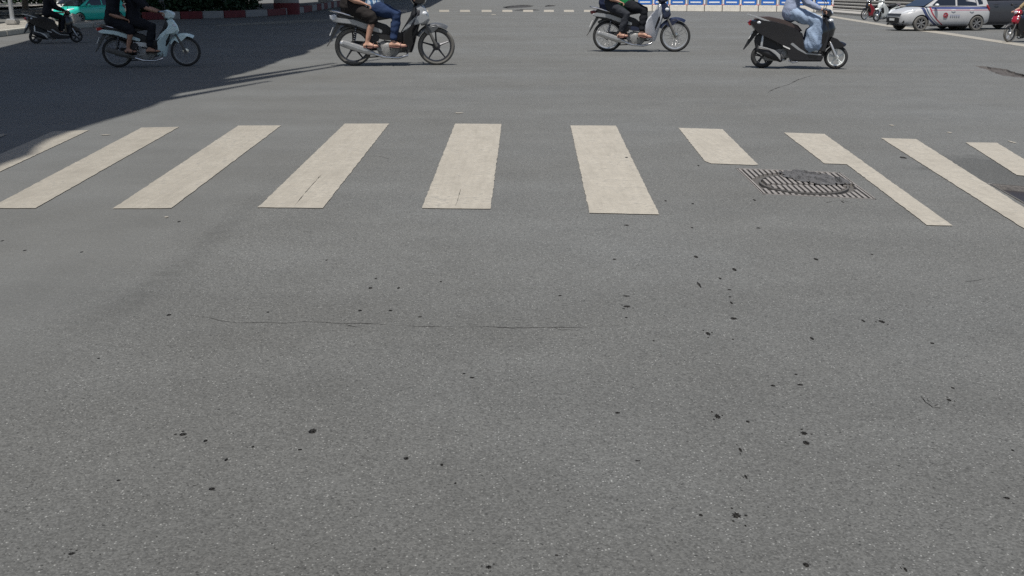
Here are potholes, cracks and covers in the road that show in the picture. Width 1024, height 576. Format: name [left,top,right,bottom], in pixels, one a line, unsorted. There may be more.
crack [192,315,600,330]
manhole cover [736,168,877,200]
